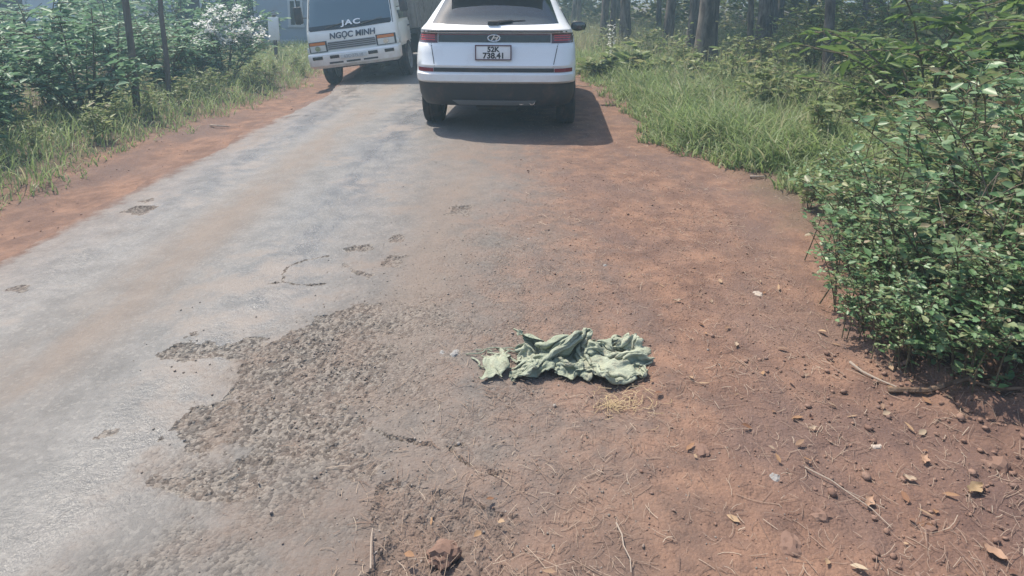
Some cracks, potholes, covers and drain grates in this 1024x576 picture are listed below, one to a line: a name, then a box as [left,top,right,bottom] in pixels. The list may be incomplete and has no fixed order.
pothole [381,255,409,268]
pothole [154,302,407,481]
pothole [343,244,374,253]
pothole [5,285,30,293]
crack [268,255,330,286]
pothole [119,205,159,216]
pothole [443,204,477,217]
pothole [388,234,405,243]
